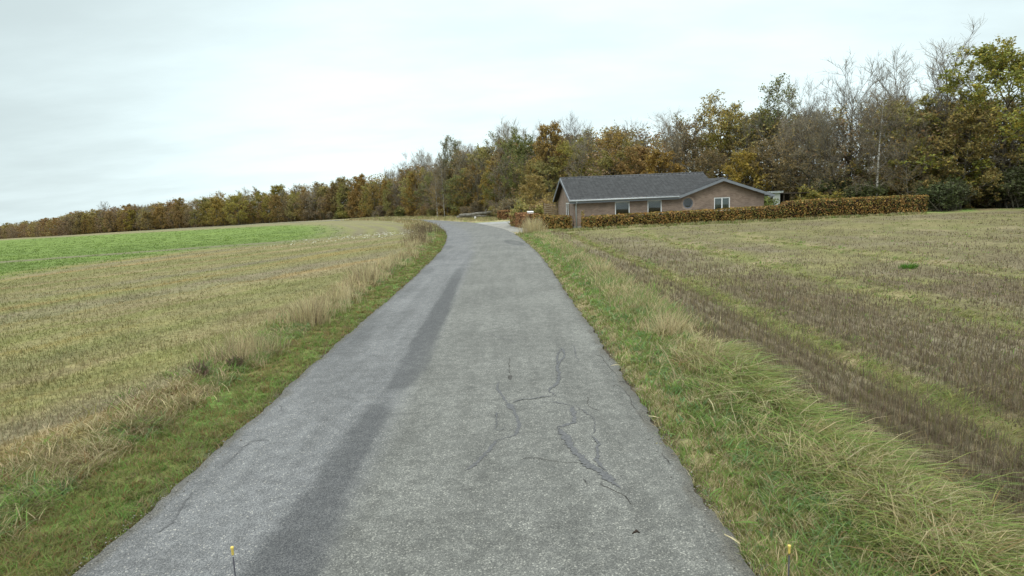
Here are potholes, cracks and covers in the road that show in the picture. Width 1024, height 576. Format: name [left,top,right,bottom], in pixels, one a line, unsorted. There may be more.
crack [598,355,644,421]
crack [155,492,193,533]
